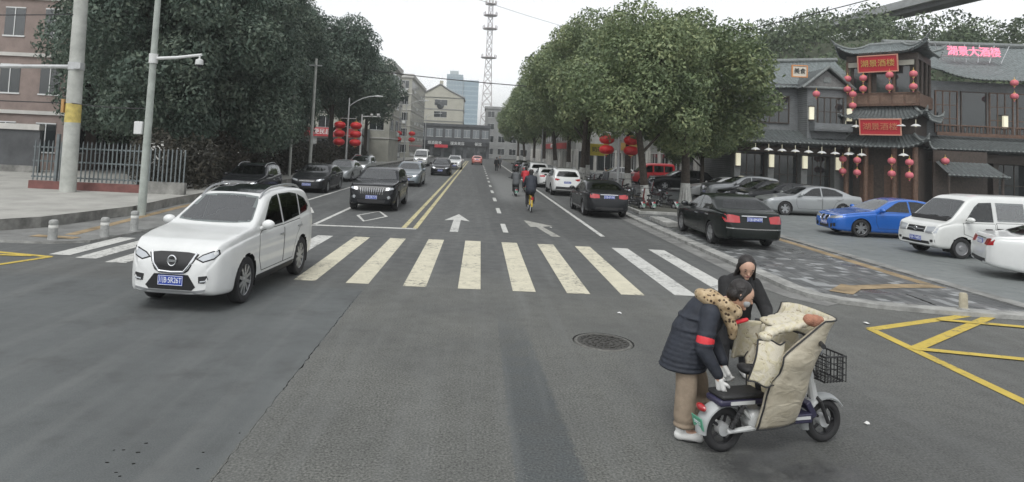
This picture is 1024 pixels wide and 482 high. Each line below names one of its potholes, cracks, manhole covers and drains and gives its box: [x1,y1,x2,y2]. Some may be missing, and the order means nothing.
manhole cover [572,333,634,352]
